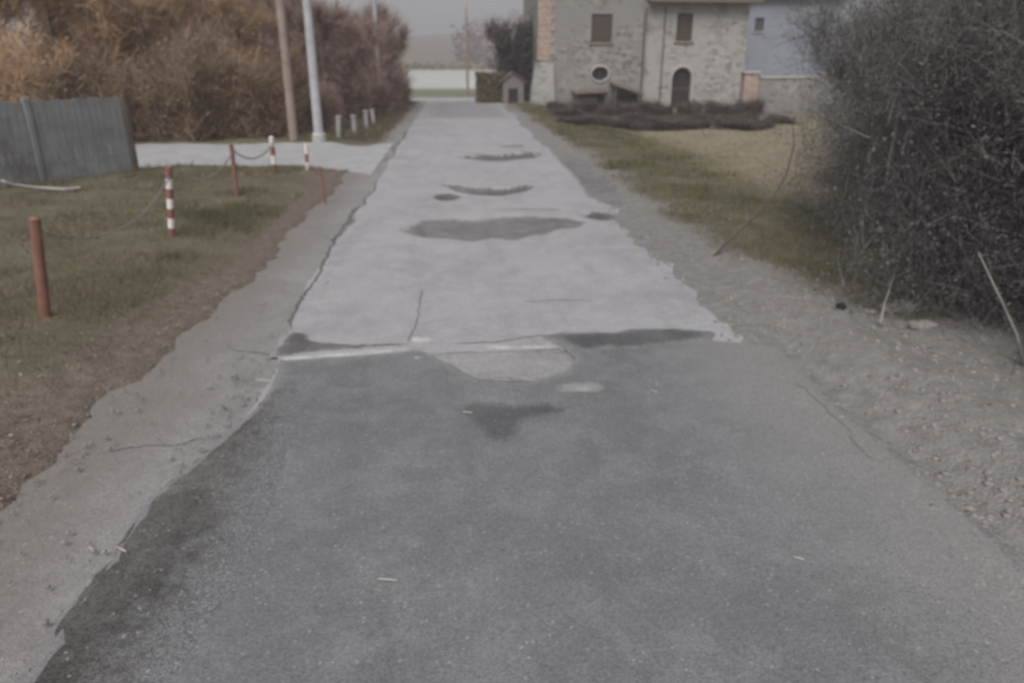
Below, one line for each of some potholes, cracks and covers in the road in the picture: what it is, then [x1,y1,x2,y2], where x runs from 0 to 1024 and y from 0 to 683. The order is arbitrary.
crack [114,438,201,451]
crack [794,382,872,459]
crack [407,288,423,343]
crack [286,185,376,333]
